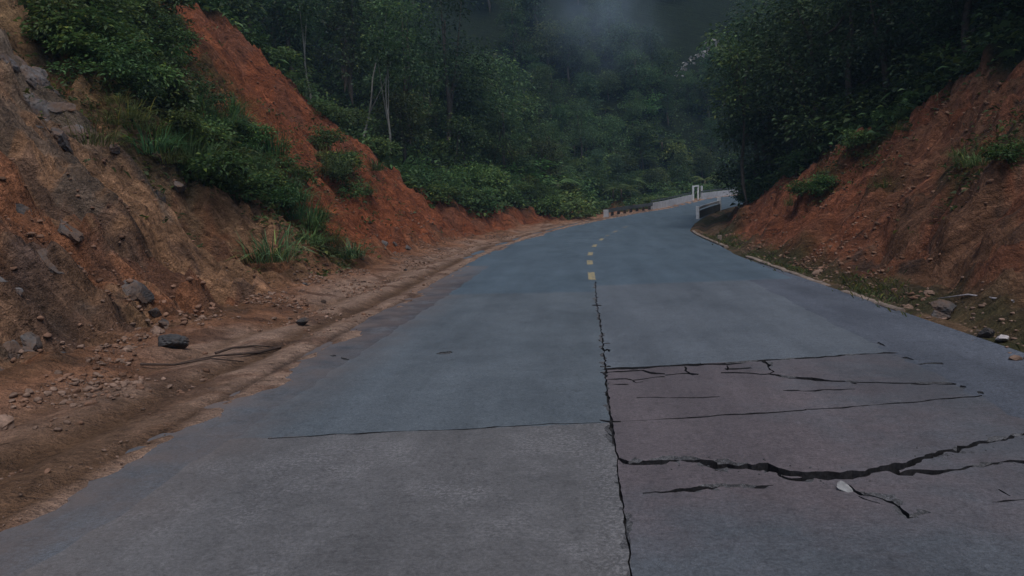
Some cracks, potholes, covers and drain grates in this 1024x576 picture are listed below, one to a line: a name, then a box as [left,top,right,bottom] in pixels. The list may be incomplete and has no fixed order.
crack [592,282,1024,576]
